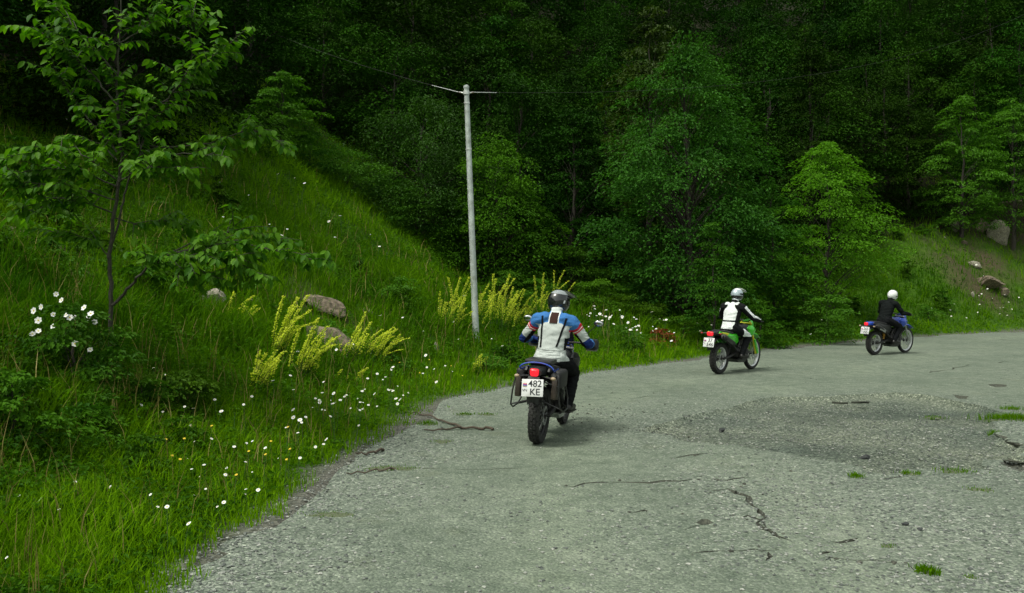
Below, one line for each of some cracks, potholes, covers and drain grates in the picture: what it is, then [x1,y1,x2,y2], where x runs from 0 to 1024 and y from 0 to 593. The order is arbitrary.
crack [571,476,791,561]
pothole [643,392,1024,475]
crack [994,433,1024,448]
